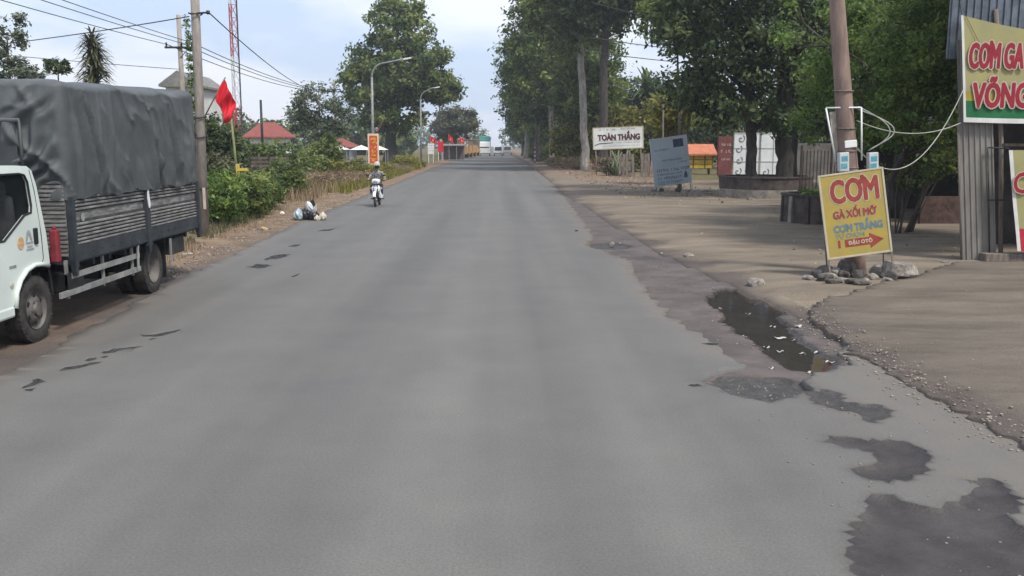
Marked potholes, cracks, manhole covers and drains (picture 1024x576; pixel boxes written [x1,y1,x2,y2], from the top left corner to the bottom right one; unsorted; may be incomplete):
pothole [704,288,840,373]
